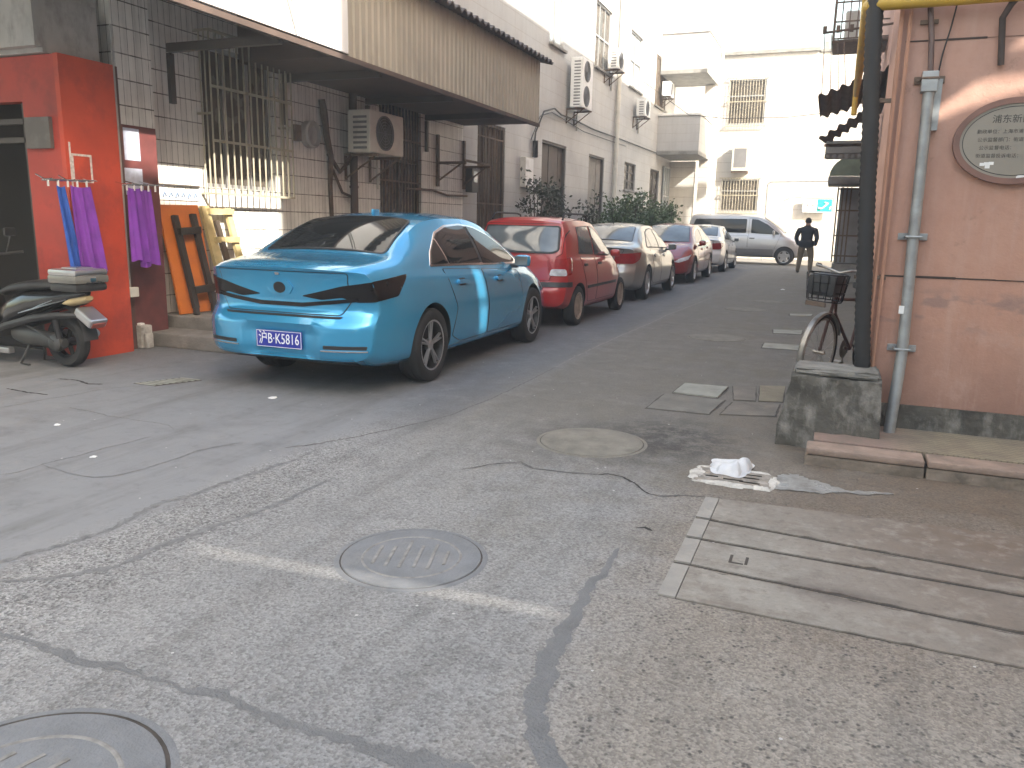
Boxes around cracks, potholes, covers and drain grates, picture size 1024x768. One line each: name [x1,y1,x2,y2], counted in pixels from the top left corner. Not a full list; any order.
crack [0,437,242,477]
crack [463,461,694,496]
manhole cover [536,428,648,458]
crack [0,379,174,430]
manhole cover [334,528,488,592]
manhole cover [0,708,180,768]
drain grate [133,377,202,386]
